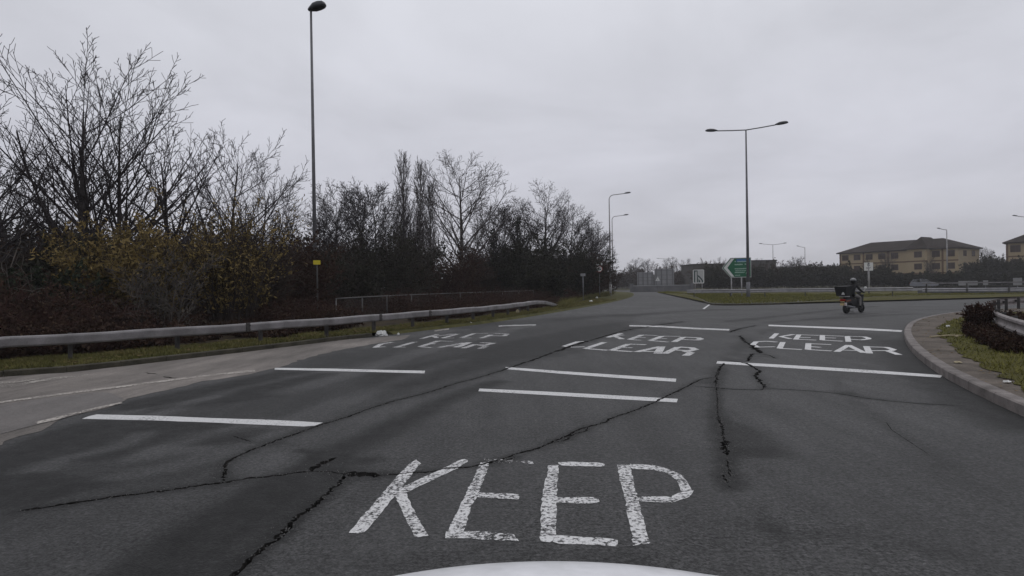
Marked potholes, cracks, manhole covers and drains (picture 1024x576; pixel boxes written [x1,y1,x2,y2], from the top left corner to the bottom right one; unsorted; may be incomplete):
crack [0,322,942,576]
